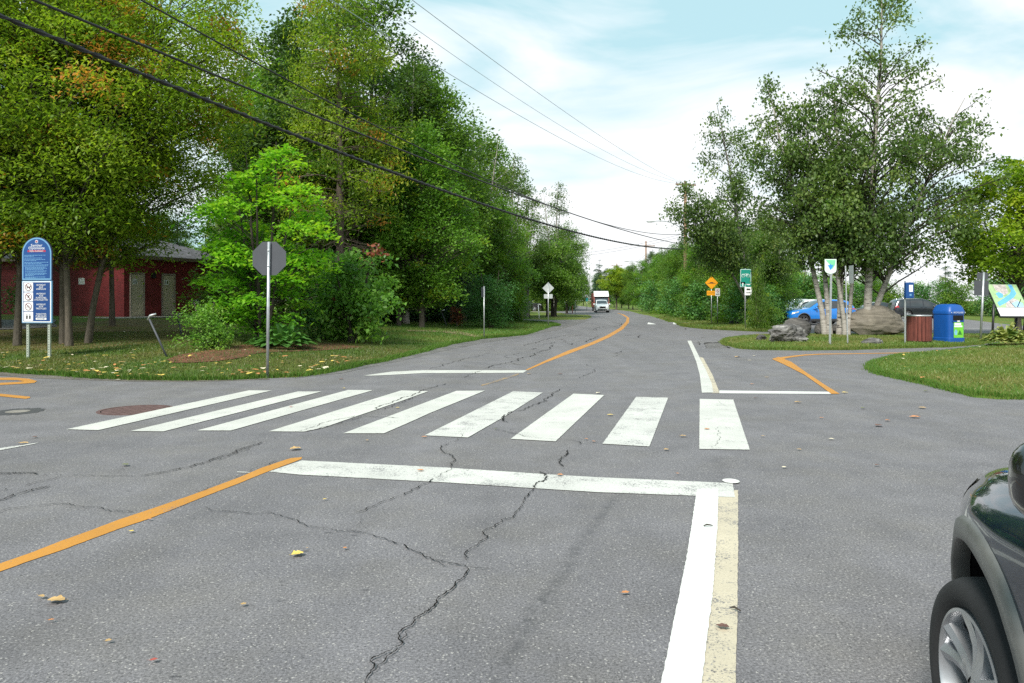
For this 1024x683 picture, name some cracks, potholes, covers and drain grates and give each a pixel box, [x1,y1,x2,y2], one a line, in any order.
manhole cover [96,405,173,415]
crack [0,371,646,683]
